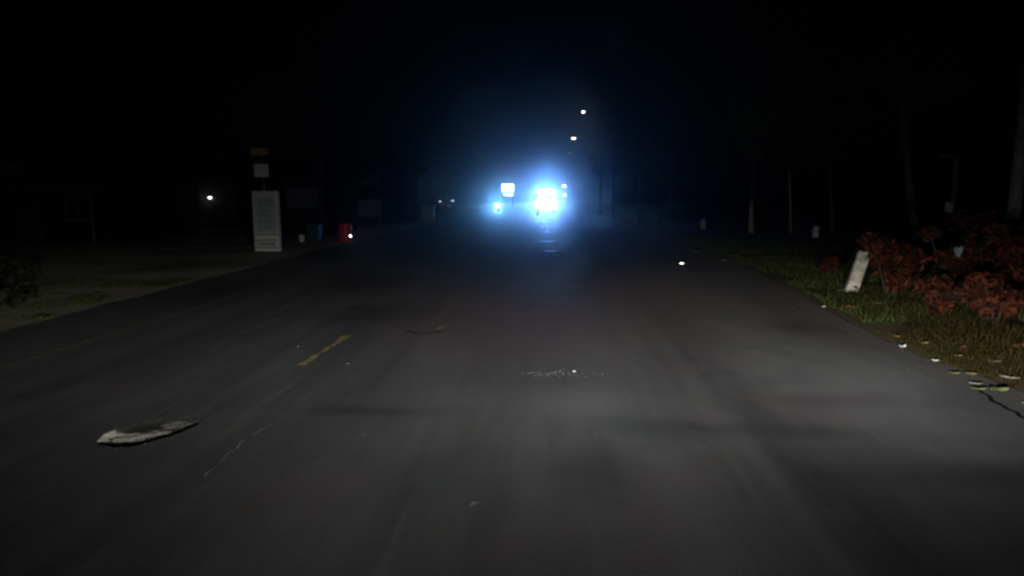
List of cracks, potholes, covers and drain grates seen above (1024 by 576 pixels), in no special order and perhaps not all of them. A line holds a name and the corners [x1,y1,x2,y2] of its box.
crack [973,384,1024,418]
